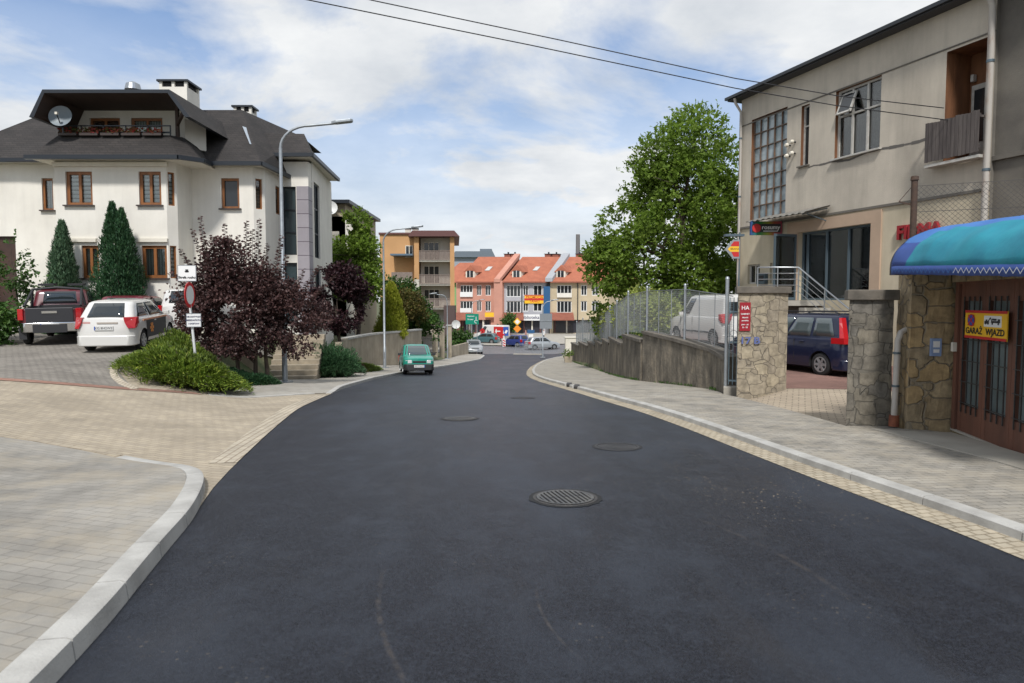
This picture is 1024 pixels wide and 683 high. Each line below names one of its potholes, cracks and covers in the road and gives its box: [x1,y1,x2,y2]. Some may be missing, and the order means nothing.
manhole cover [528,489,603,507]
manhole cover [592,442,643,451]
